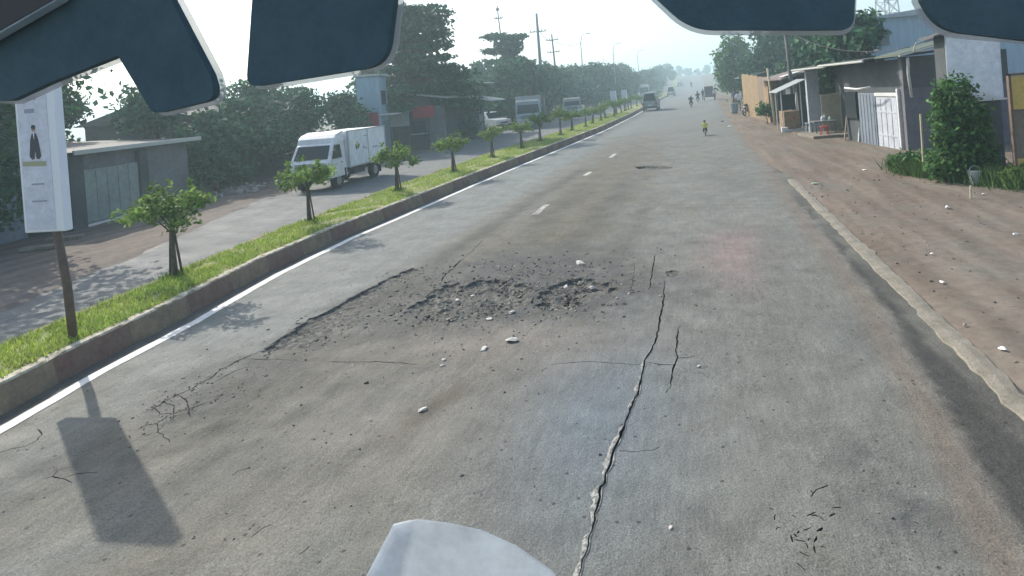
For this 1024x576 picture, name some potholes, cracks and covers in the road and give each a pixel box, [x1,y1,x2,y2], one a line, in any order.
pothole [405,280,537,323]
crack [142,352,417,442]
crack [550,330,708,392]
crack [48,467,98,483]
pothole [534,278,620,311]
